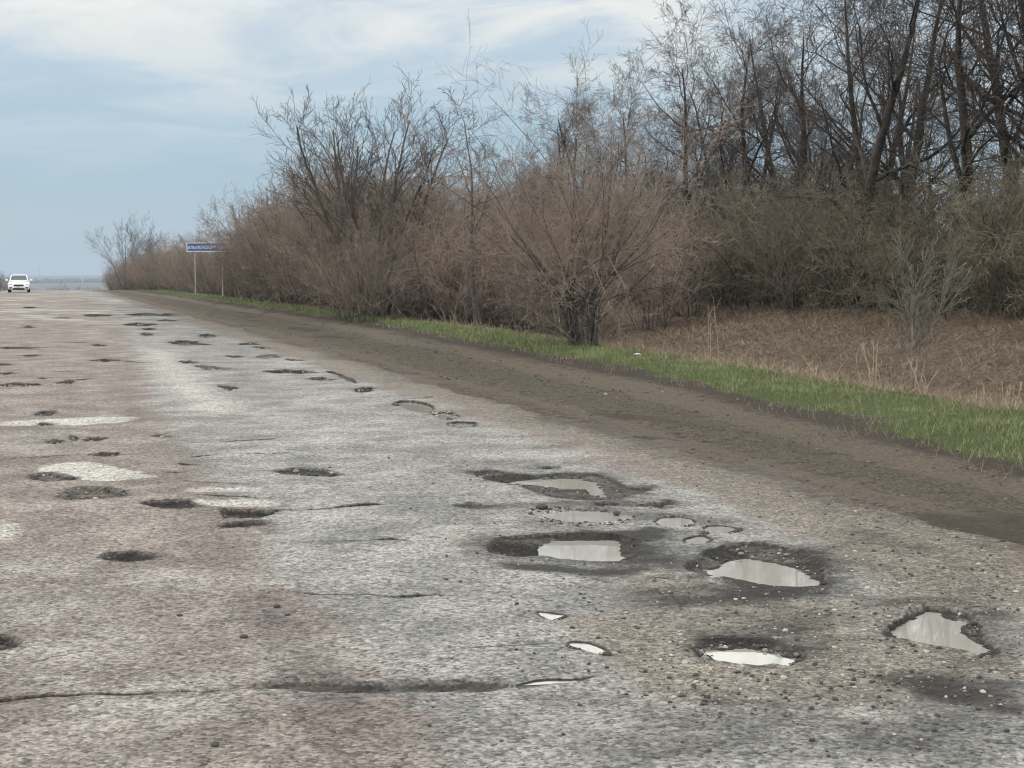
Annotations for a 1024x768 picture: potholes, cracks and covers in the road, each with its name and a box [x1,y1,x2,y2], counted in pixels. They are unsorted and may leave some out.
pothole [682,542,832,587]
pothole [139,499,202,509]
pothole [473,470,657,501]
